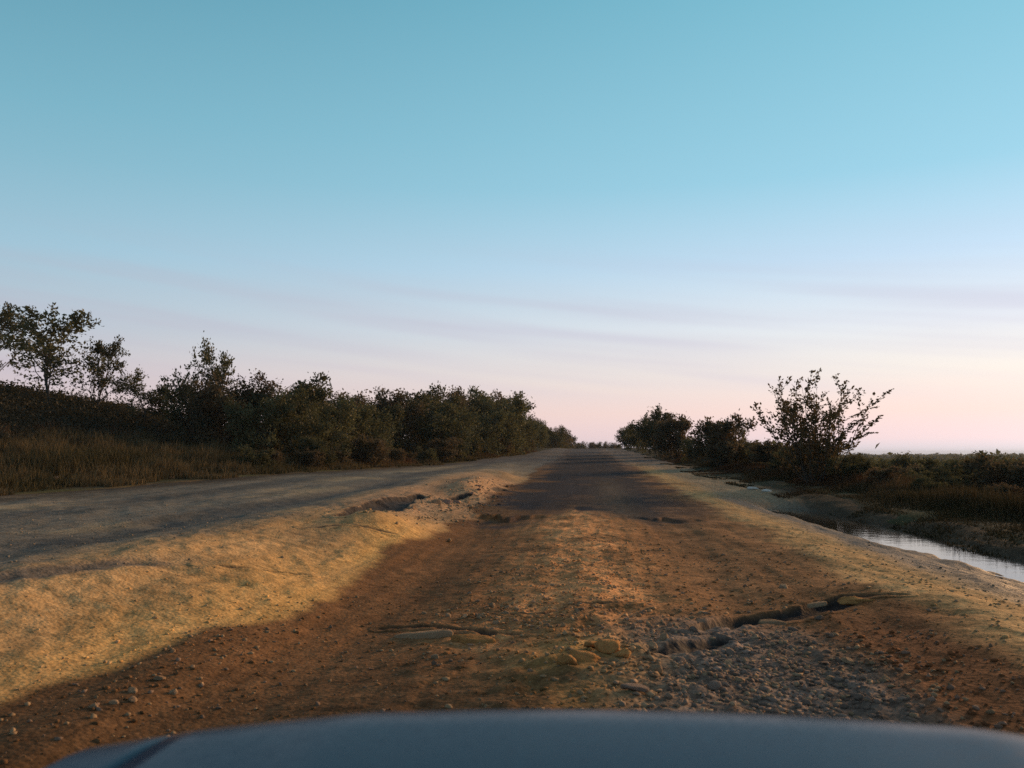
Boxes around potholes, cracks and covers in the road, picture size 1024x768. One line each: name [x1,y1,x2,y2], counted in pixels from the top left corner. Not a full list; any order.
pothole [320,492,432,518]
crack [368,591,919,659]
pothole [440,489,481,502]
